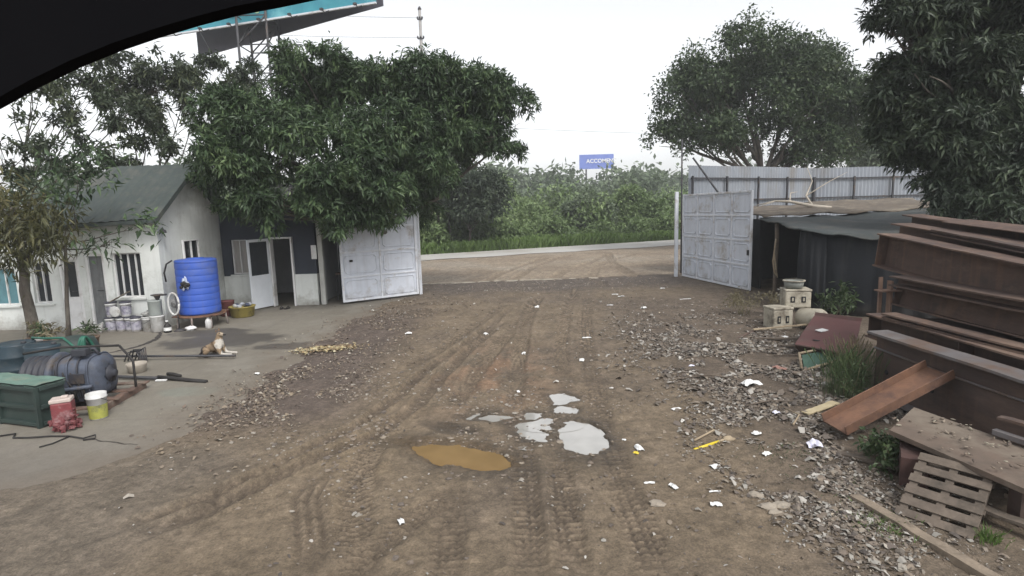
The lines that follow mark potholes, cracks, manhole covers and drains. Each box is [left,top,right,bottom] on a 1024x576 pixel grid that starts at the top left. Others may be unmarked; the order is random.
pothole [545,413,625,468]
pothole [376,435,549,478]
